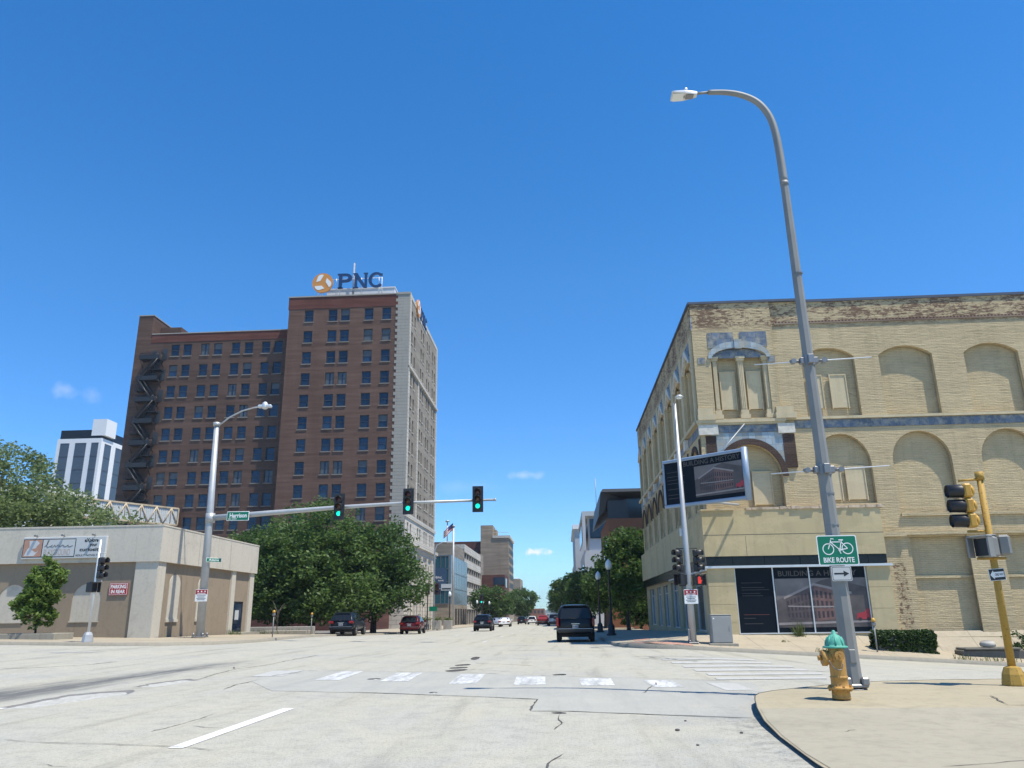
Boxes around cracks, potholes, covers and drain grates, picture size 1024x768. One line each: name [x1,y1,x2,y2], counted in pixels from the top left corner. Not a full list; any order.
crack [364,692,538,710]
crack [7,713,216,750]
